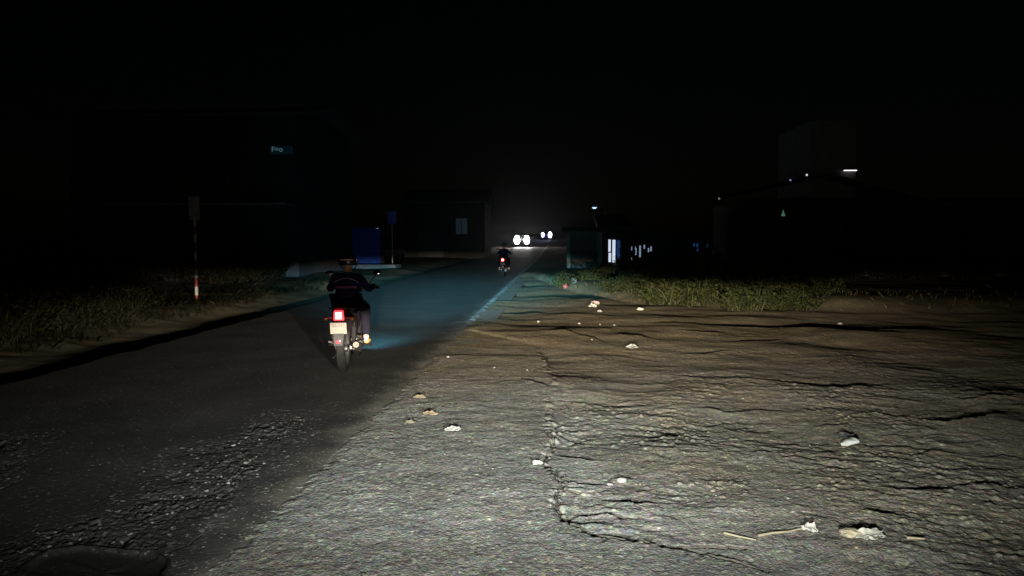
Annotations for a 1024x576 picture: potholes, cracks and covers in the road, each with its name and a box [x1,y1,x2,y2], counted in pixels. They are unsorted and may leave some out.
pothole [16,545,172,576]
crack [543,429,768,573]
